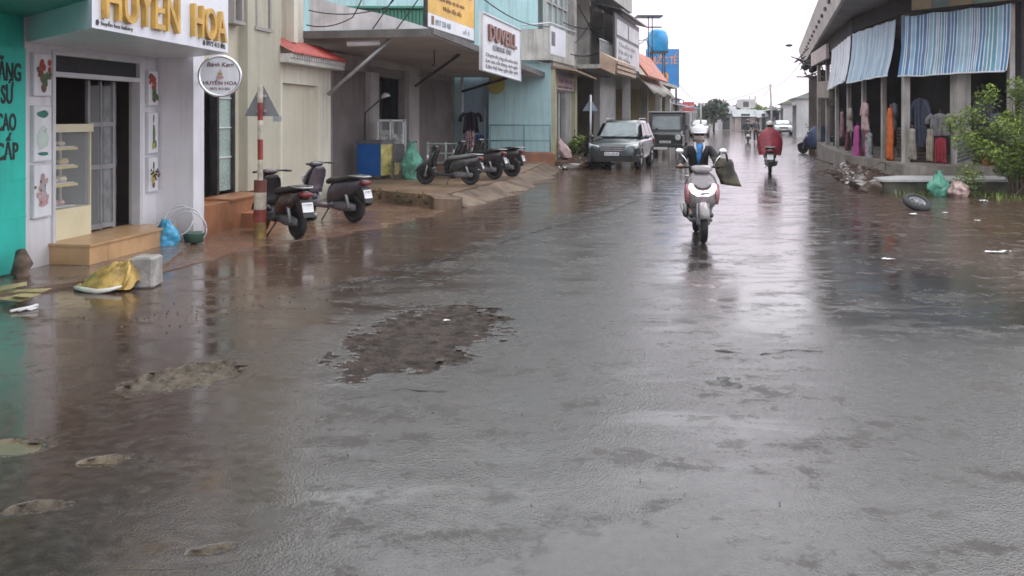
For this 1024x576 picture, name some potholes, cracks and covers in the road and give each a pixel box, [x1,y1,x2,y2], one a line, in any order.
pothole [88,356,271,410]
pothole [288,291,531,404]
pothole [0,430,90,463]
